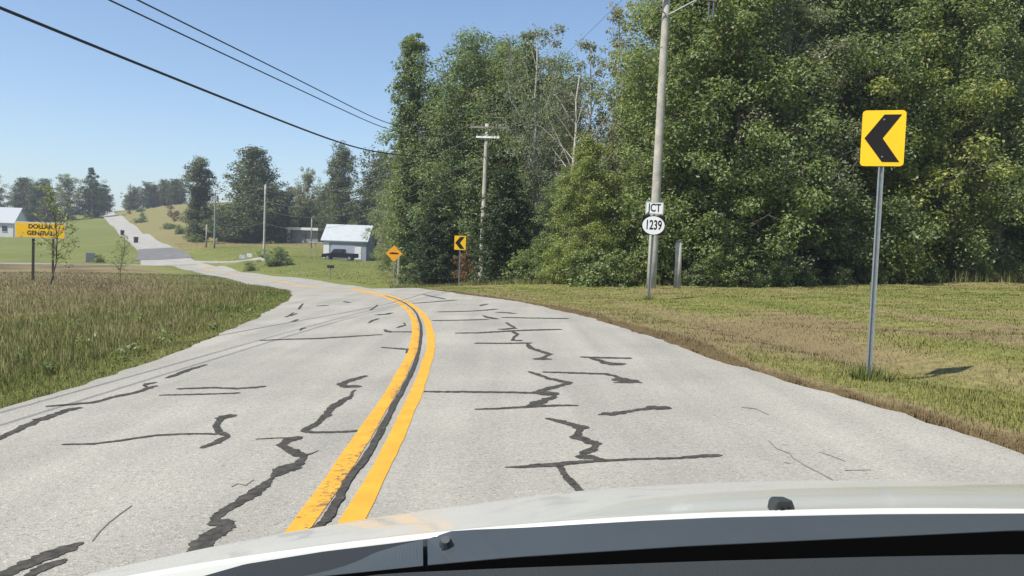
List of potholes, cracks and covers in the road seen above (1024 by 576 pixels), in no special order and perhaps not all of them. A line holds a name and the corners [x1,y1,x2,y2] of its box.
crack [92,505,132,541]
crack [768,440,871,480]
